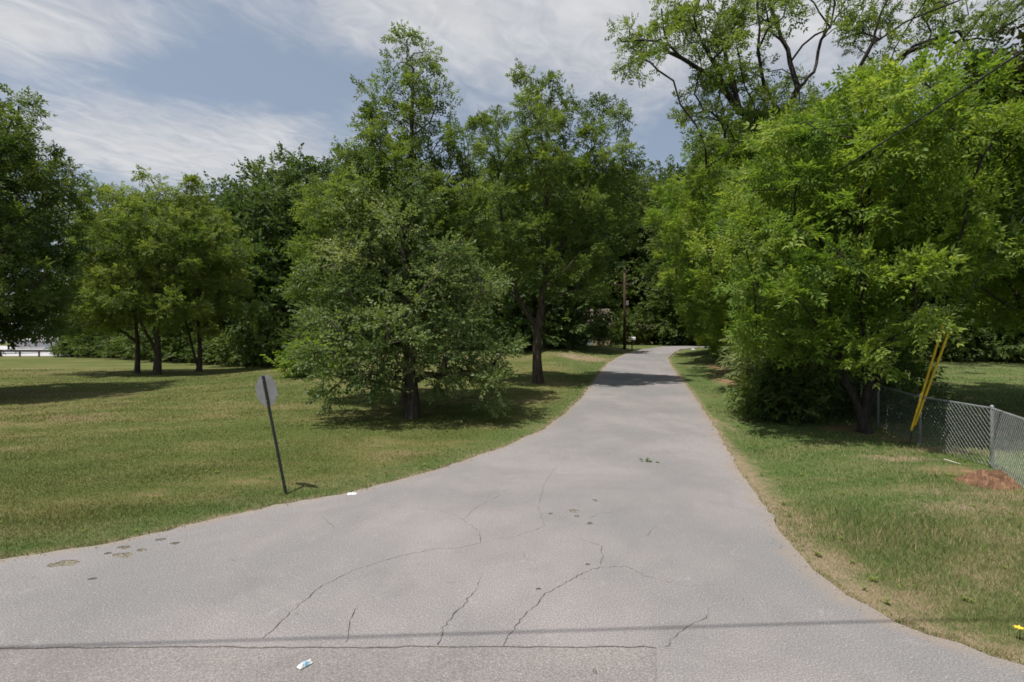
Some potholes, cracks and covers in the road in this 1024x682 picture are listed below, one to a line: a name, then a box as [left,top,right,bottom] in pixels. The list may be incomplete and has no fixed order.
crack [262,466,558,639]
crack [501,532,709,647]
